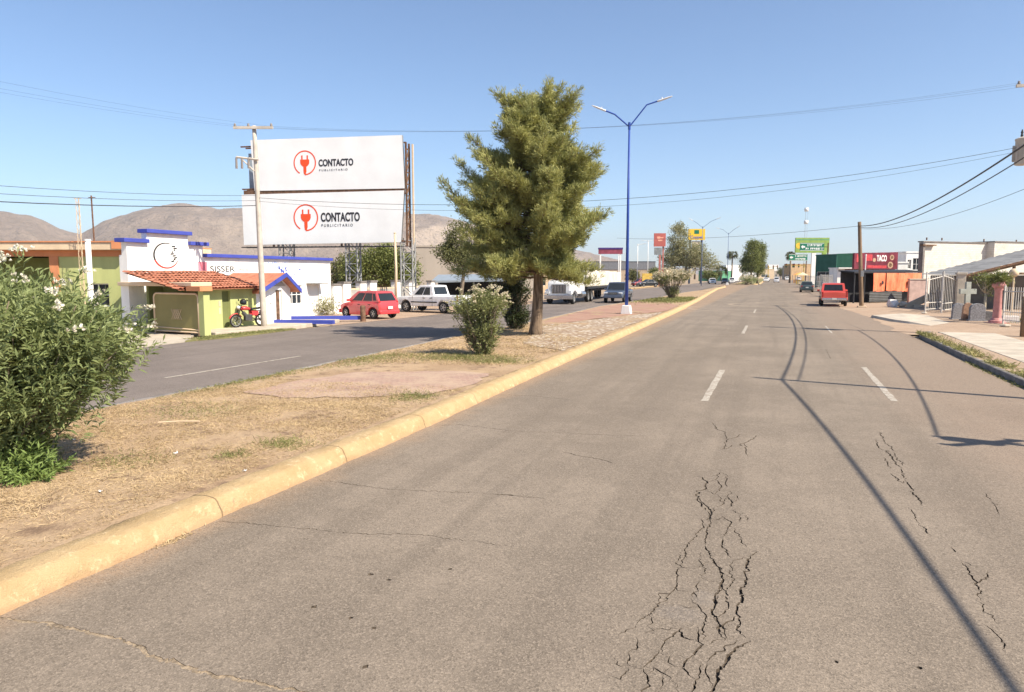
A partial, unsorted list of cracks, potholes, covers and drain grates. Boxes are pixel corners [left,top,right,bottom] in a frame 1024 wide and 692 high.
crack [320,480,539,498]
crack [952,548,1006,651]
crack [0,617,306,692]
crack [875,433,930,535]
crack [220,521,512,547]
crack [715,426,756,456]
crack [613,473,757,692]
